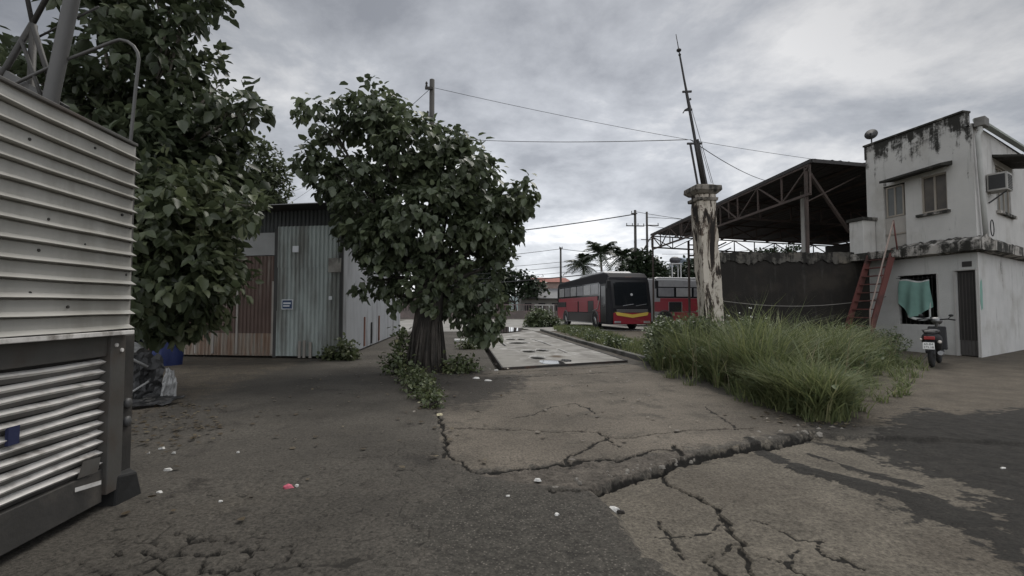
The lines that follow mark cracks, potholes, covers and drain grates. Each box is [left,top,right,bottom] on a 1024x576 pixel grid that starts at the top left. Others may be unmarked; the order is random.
crack [433,403,866,576]
crack [36,533,378,576]
